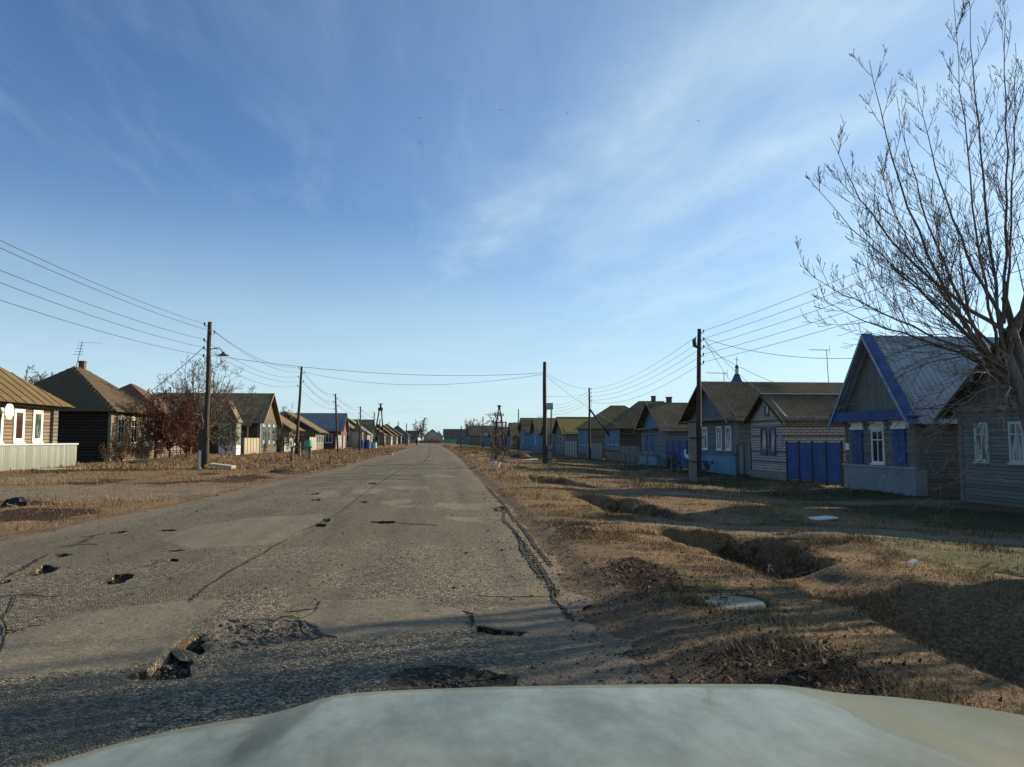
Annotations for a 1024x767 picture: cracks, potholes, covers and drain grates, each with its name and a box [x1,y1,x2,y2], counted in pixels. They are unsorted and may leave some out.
pothole [117,648,201,684]
manhole cover [706,596,766,610]
crack [464,485,575,626]
pothole [18,564,63,577]
crack [0,594,54,652]
pothole [95,573,139,586]
pothole [379,663,526,690]
pothole [470,625,529,638]
